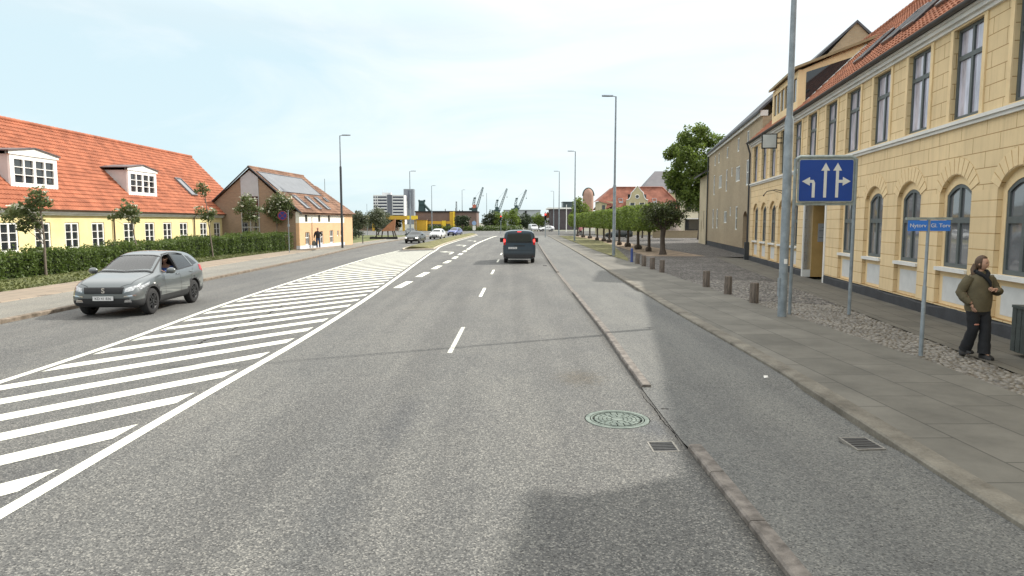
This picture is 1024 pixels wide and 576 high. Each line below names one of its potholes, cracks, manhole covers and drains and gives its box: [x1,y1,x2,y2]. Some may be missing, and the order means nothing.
drain grate [647,441,680,452]
drain grate [838,437,886,451]
manhole cover [585,410,650,429]
